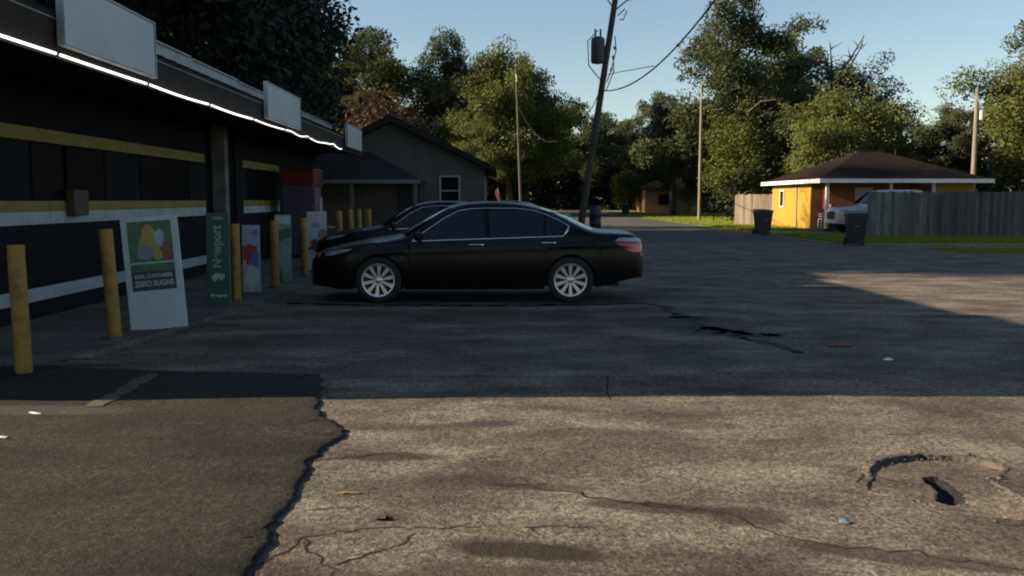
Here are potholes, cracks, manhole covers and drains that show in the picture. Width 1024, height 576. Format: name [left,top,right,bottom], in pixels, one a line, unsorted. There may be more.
crack [492,484,1024,570]
crack [258,526,480,576]
pothole [850,450,1024,522]
